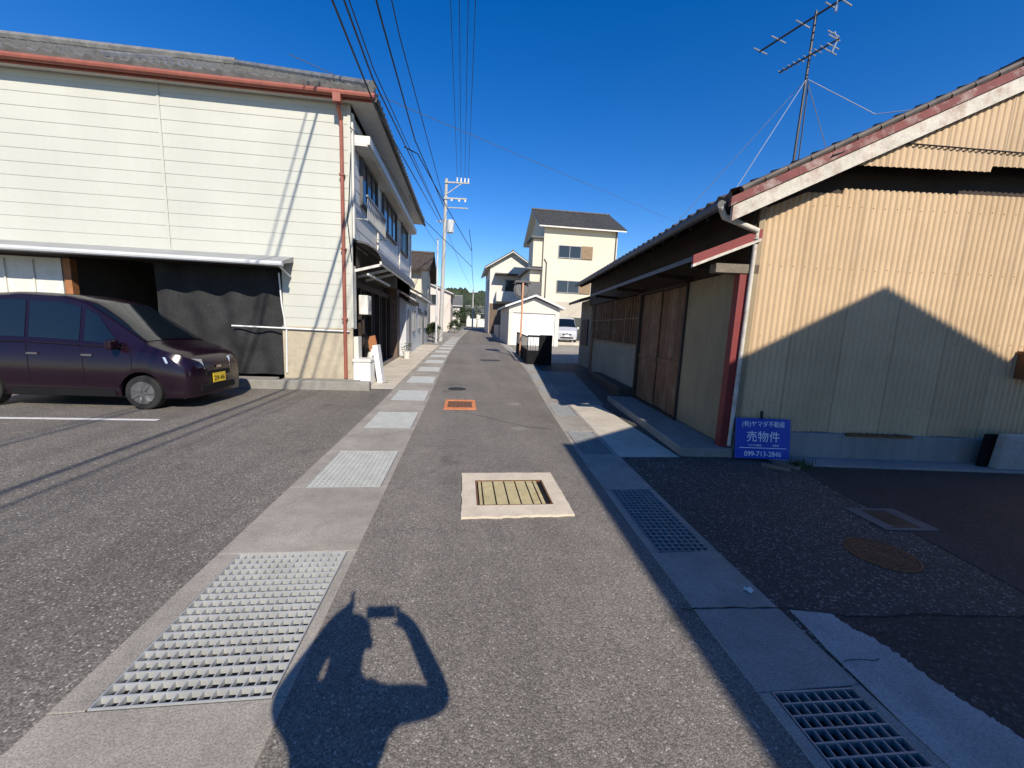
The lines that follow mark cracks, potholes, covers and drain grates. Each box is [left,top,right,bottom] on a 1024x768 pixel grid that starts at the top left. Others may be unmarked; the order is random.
utility cover [845,508,941,531]
drain grate [363,412,419,428]
drain grate [305,451,399,488]
drain grate [771,687,936,768]
drain grate [610,489,710,553]
manhole cover [443,399,476,410]
drain grate [87,551,347,712]
manhole cover [842,537,924,573]
drain grate [567,431,613,454]
